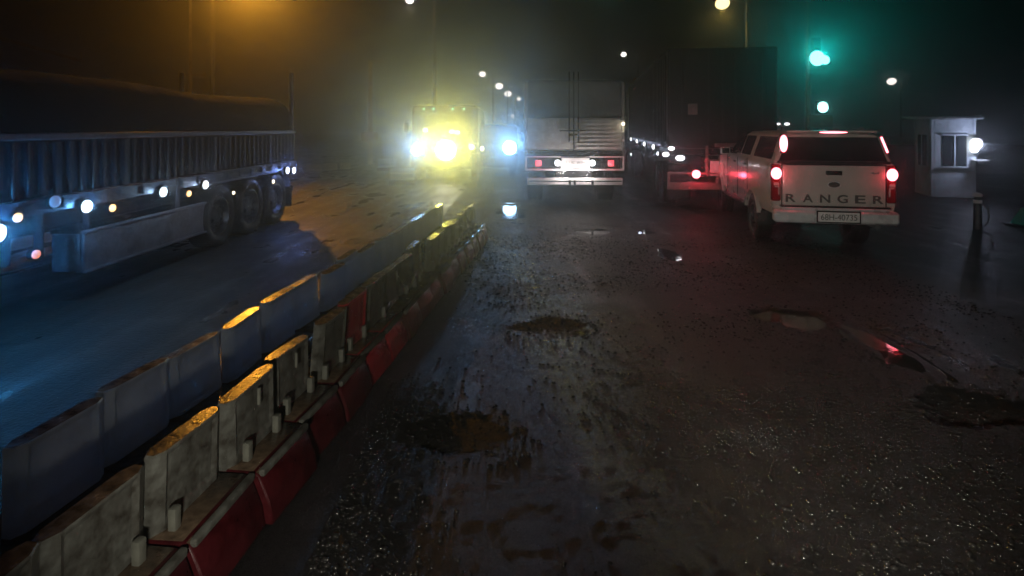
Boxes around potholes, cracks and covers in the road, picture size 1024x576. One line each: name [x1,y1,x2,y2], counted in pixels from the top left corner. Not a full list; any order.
pothole [503,317,592,341]
pothole [909,384,1024,432]
pothole [390,412,518,460]
pothole [747,306,837,331]
